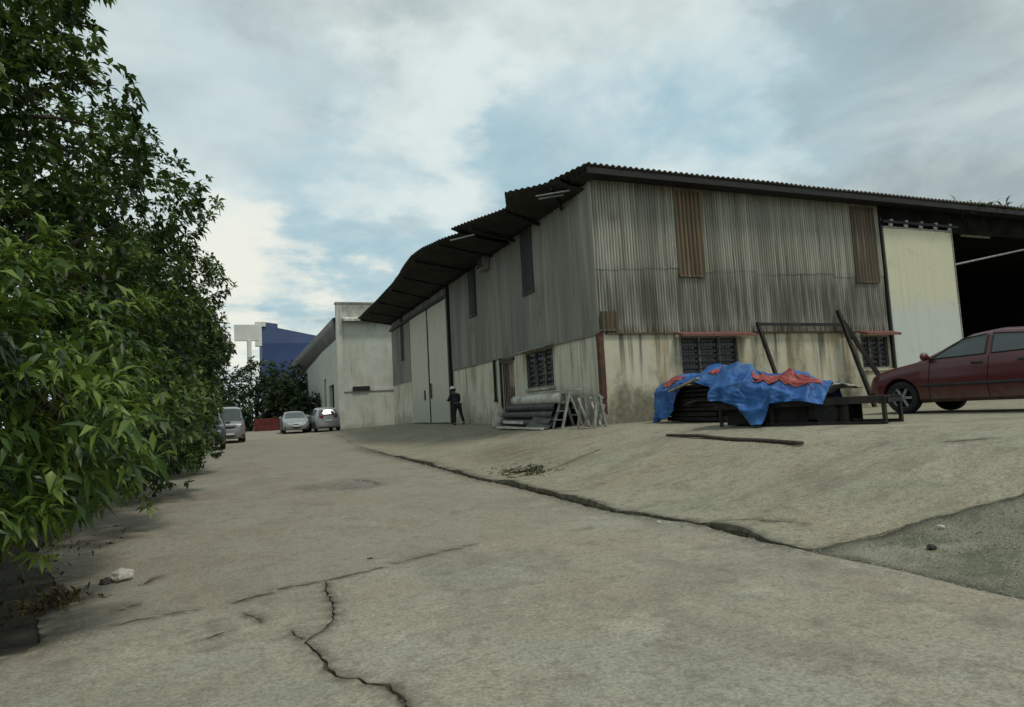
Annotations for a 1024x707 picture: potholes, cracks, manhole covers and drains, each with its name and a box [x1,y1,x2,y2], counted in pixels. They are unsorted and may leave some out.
crack [231,547,461,707]
